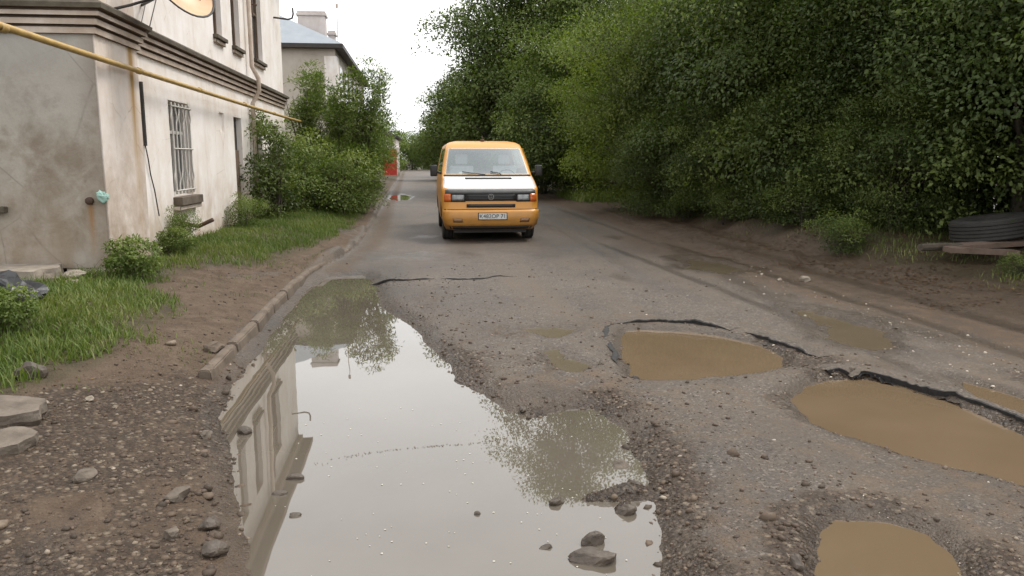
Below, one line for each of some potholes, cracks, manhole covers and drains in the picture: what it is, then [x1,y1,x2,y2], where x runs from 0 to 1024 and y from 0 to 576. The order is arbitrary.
crack [602,318,1024,423]
pothole [804,511,976,576]
pothole [211,274,675,576]
pothole [616,326,789,380]
crack [370,274,515,285]
pothole [784,375,1024,486]
pothole [790,305,899,351]
